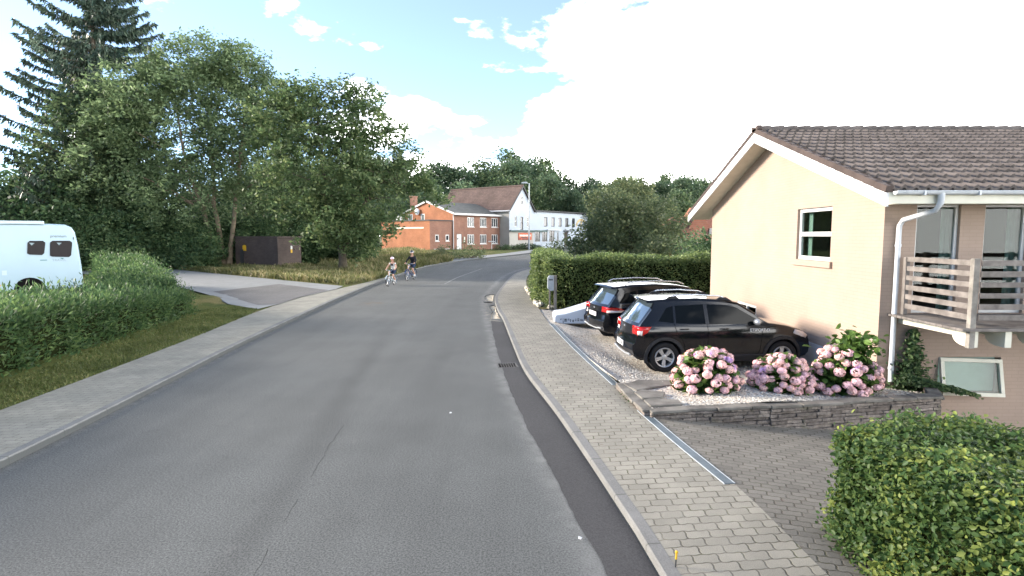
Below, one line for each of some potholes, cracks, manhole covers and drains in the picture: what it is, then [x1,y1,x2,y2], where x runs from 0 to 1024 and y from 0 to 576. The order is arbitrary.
crack [254,427,343,575]
